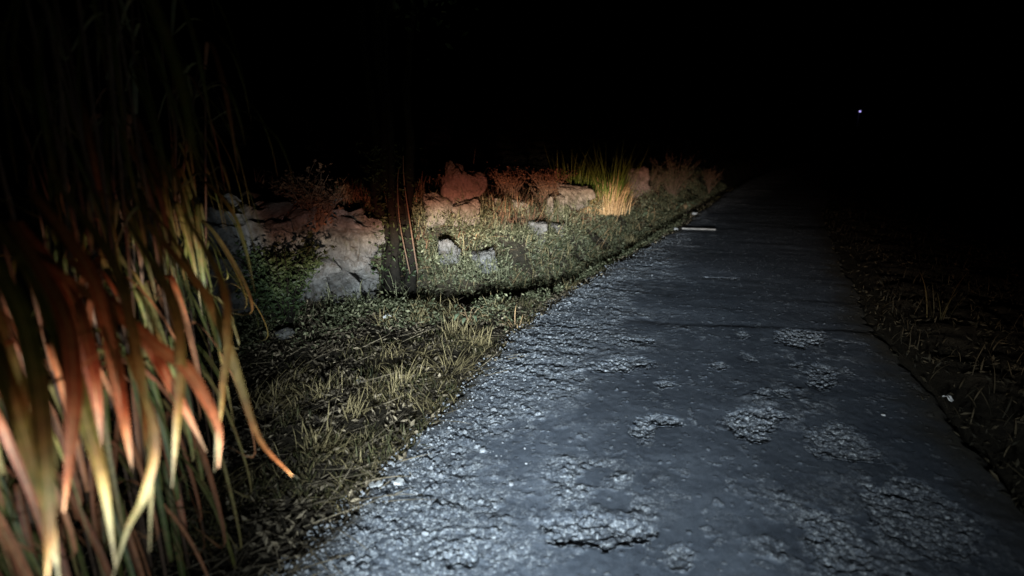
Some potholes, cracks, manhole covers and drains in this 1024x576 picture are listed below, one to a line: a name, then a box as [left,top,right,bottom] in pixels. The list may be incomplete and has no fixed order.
pothole [773,328,827,350]
pothole [801,419,889,467]
pothole [627,411,685,445]
pothole [539,510,660,553]
